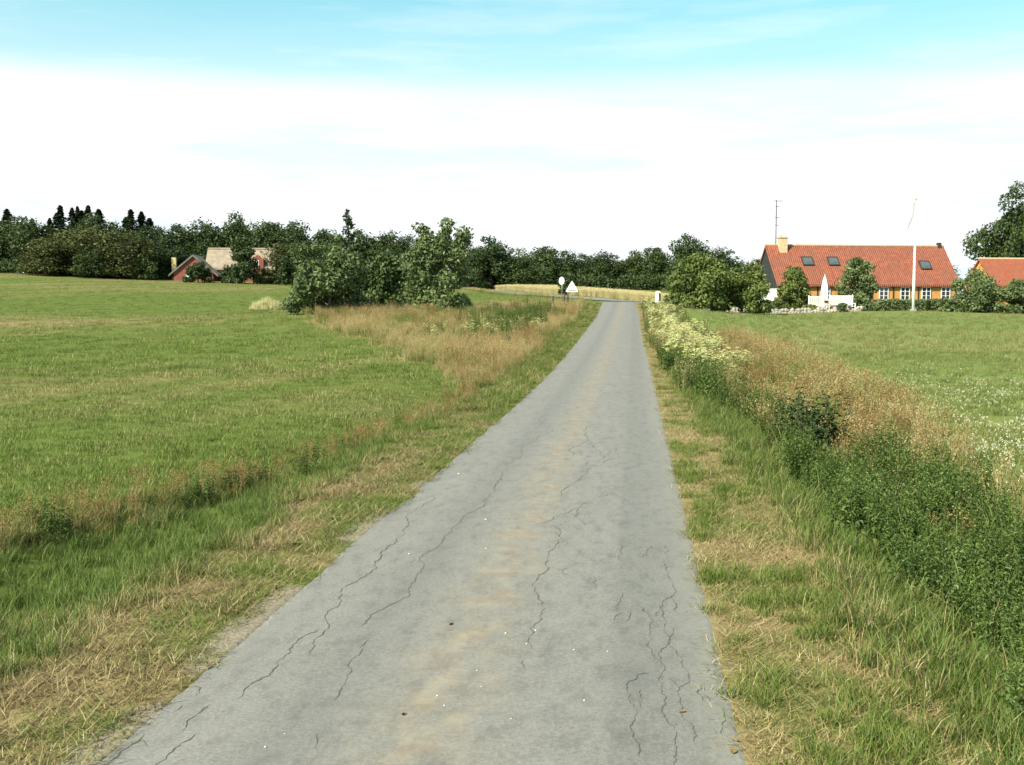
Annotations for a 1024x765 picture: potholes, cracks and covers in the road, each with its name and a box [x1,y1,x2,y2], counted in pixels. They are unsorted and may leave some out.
crack [236,498,435,700]
crack [614,562,710,765]
crack [155,686,208,765]
crack [527,425,617,647]
